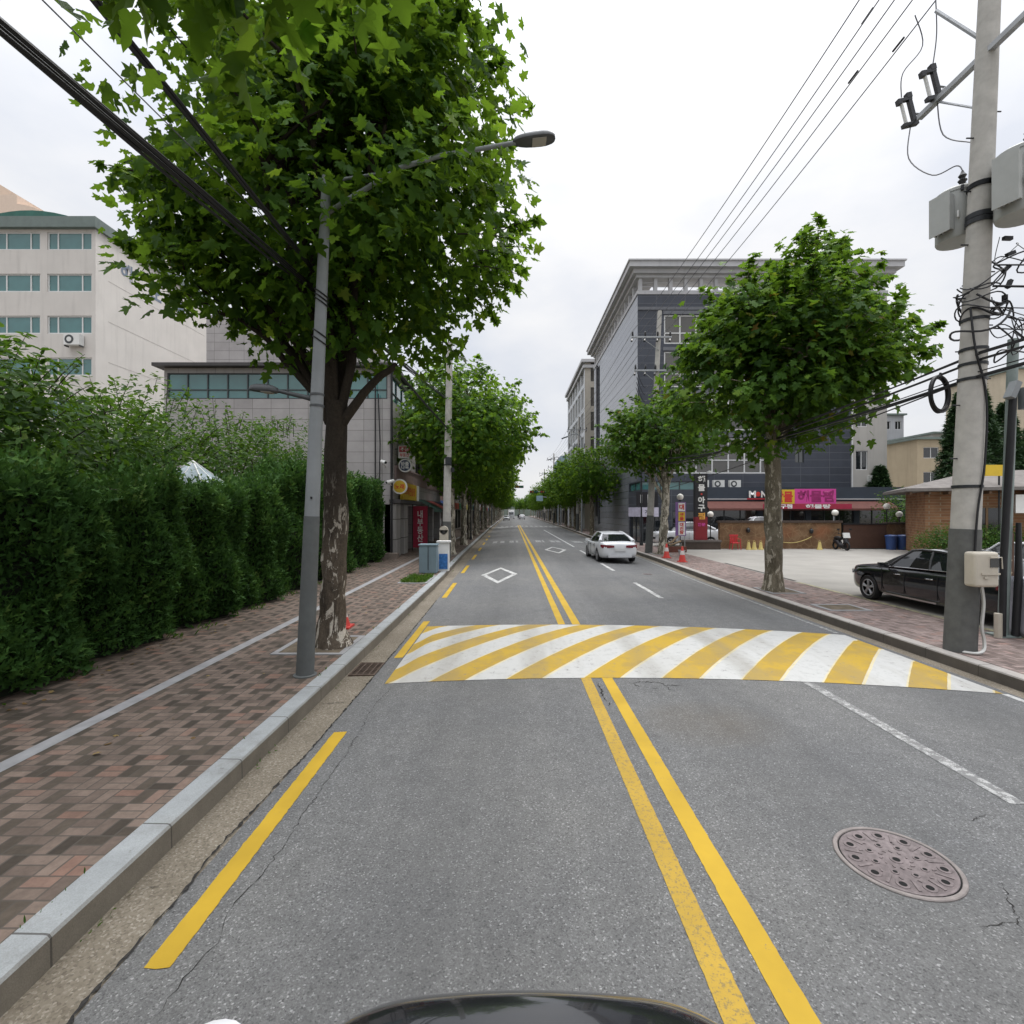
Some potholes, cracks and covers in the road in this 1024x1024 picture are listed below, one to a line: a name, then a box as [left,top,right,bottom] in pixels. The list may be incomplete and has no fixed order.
manhole cover [832,827,969,903]
crack [986,881,1021,927]
drain grate [348,662,385,676]
